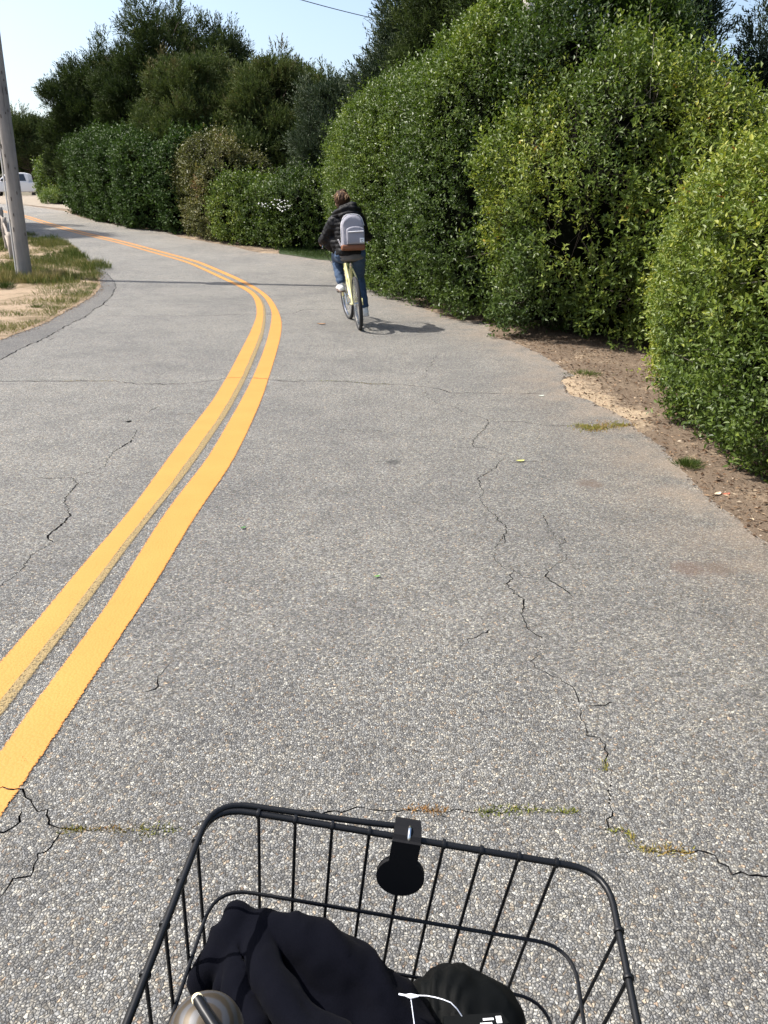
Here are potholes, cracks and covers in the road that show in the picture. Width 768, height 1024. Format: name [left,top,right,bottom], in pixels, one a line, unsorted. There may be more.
crack [0,353,768,898]
